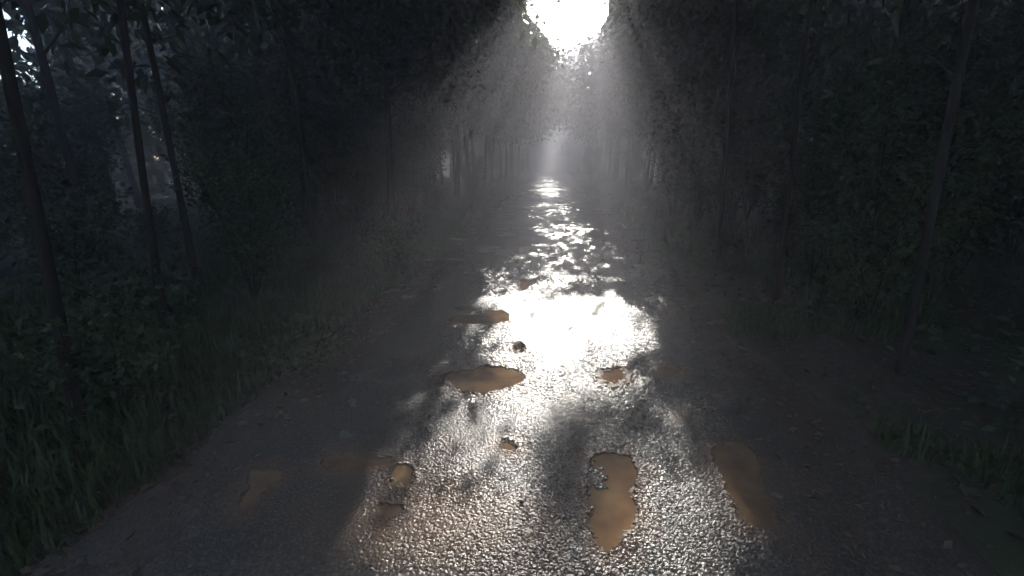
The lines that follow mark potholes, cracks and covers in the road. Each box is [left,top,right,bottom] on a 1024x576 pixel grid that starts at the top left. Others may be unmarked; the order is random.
pothole [443,364,526,394]
pothole [387,463,416,490]
pothole [586,452,640,552]
pothole [238,469,283,509]
pothole [711,442,779,529]
pothole [657,364,682,377]
pothole [449,310,510,325]
pothole [377,502,404,520]
pothole [594,366,633,388]
pothole [511,341,527,353]
pothole [320,451,392,472]
pothole [500,437,518,451]
